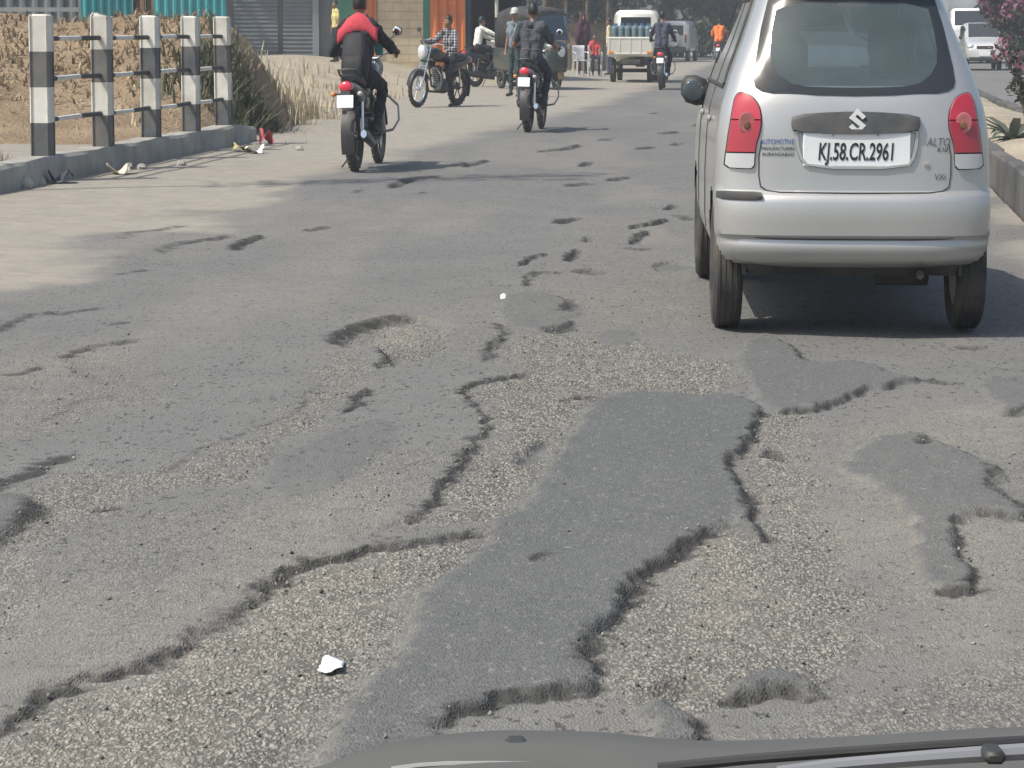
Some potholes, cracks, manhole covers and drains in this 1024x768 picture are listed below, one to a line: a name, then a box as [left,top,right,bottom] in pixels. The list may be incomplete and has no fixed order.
pothole [341,316,453,367]
crack [0,314,964,741]
pothole [556,296,582,312]
pothole [561,248,583,262]
crack [109,225,271,275]
crack [930,461,1024,600]
pothole [541,320,581,334]
